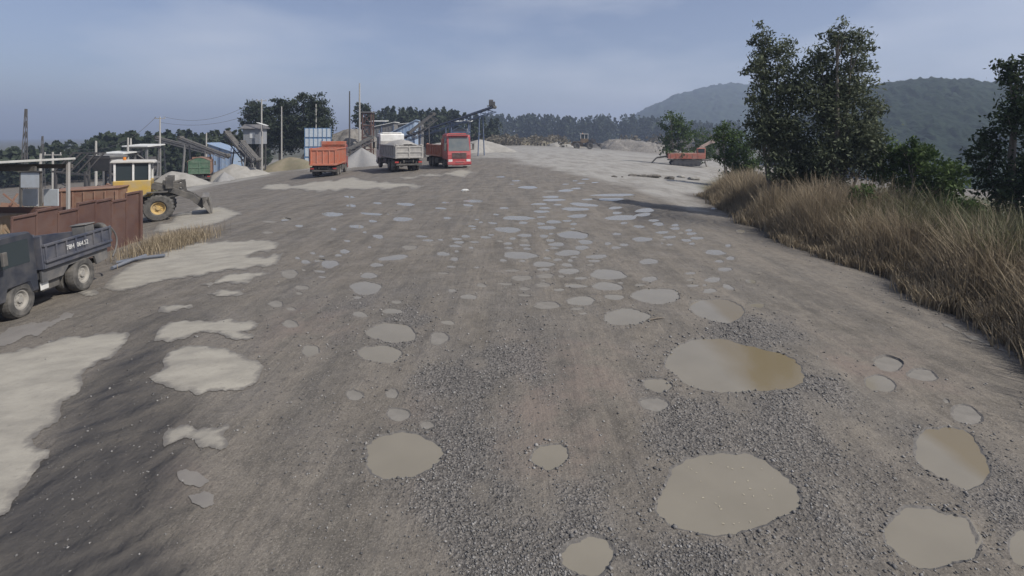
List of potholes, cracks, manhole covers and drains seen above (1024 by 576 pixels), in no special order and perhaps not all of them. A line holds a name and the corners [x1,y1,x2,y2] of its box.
pothole [357,345,403,363]
pothole [912,425,992,490]
pothole [663,337,806,393]
pothole [364,430,446,480]
pothole [654,451,803,537]
pothole [864,374,897,392]
pothole [950,403,984,425]
pothole [630,288,680,304]
pothole [559,533,616,576]
pothole [604,308,651,325]
pothole [365,322,417,343]
pothole [873,354,904,372]
